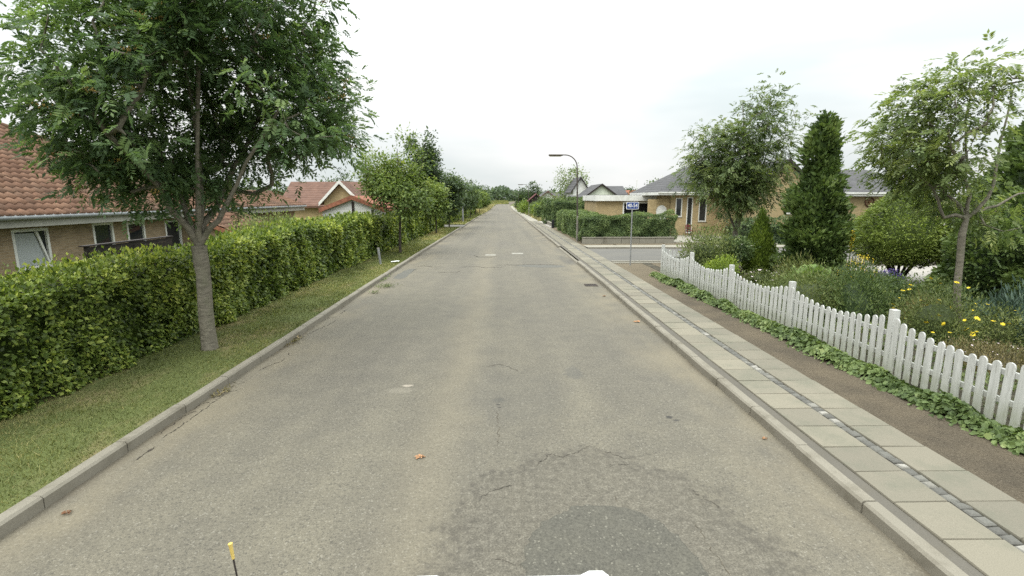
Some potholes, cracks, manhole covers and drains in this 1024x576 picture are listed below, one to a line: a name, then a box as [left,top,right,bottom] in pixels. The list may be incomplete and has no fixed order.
crack [135,385,236,461]
